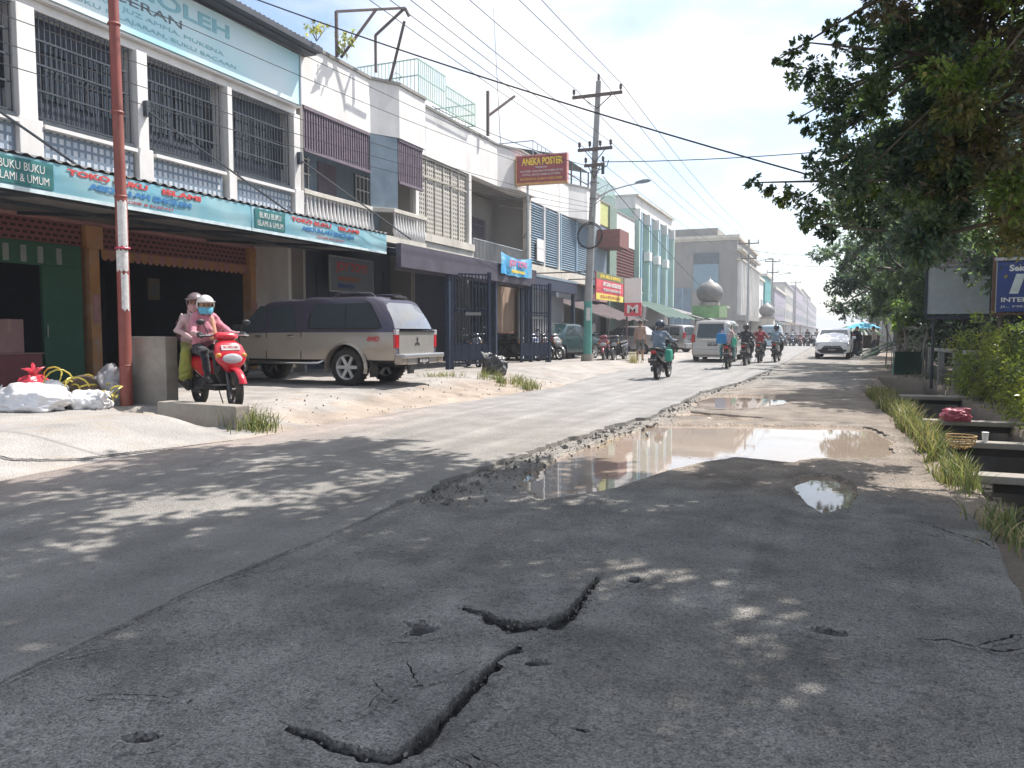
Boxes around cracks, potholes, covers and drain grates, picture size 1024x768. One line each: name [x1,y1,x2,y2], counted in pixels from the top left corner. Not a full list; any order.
pothole [506,422,907,502]
crack [337,659,480,723]
pothole [782,472,868,516]
pothole [687,394,796,410]
crack [930,525,998,549]
crack [920,633,1024,656]
pothole [97,721,186,755]
